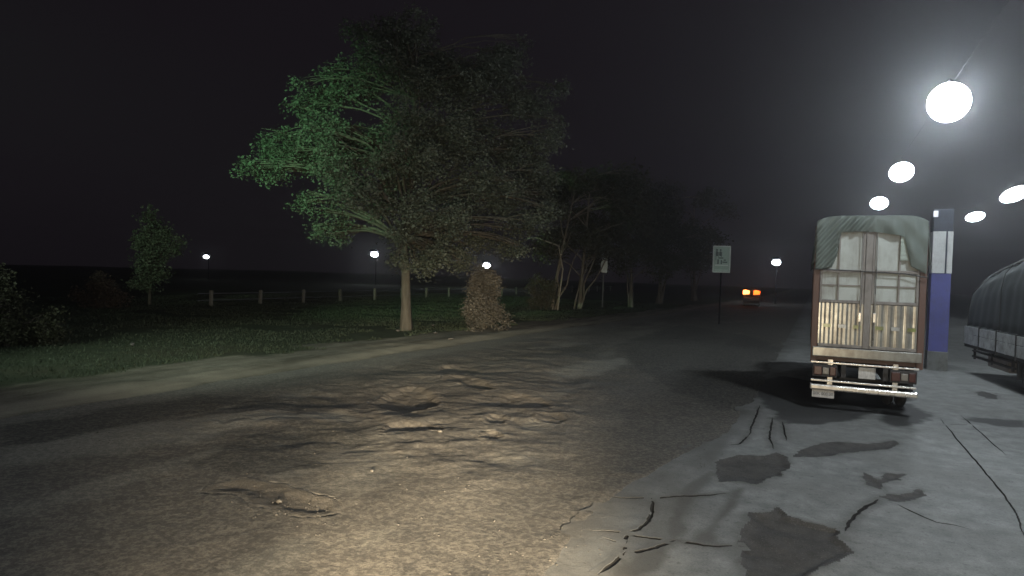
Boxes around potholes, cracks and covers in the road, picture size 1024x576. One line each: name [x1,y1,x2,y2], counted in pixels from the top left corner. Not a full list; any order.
crack [590,491,751,576]
pothole [366,384,445,414]
pothole [197,478,343,518]
pothole [479,413,514,425]
crack [725,405,792,450]
crack [835,415,1024,545]
